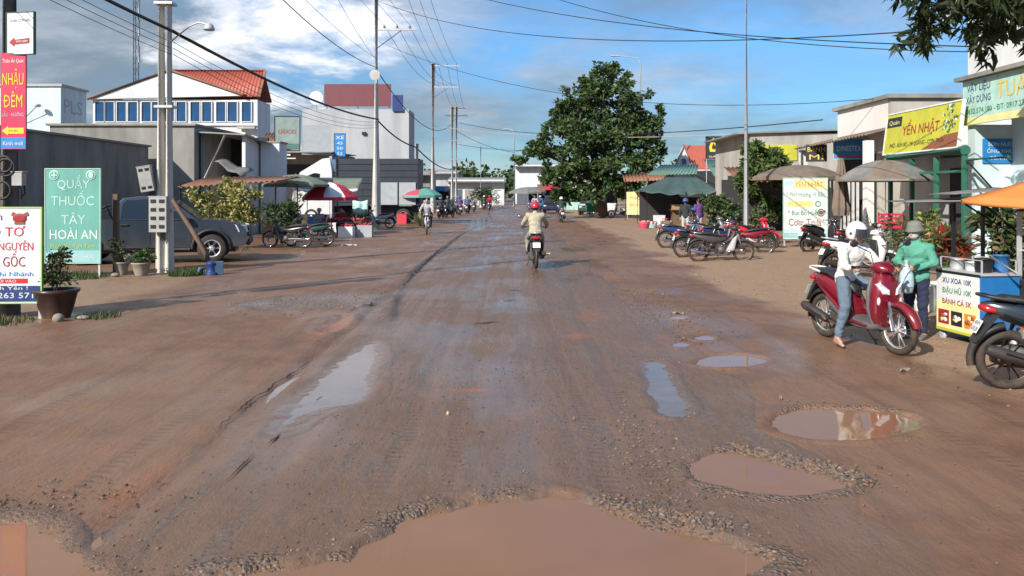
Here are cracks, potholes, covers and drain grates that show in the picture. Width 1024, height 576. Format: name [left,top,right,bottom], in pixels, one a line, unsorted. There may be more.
pothole [0,505,139,576]
pothole [630,358,706,421]
crack [218,433,281,486]
crack [219,359,313,428]
pothole [155,483,801,576]
pothole [755,403,940,446]
pothole [686,352,777,371]
pothole [246,339,396,441]
pothole [669,444,866,501]
